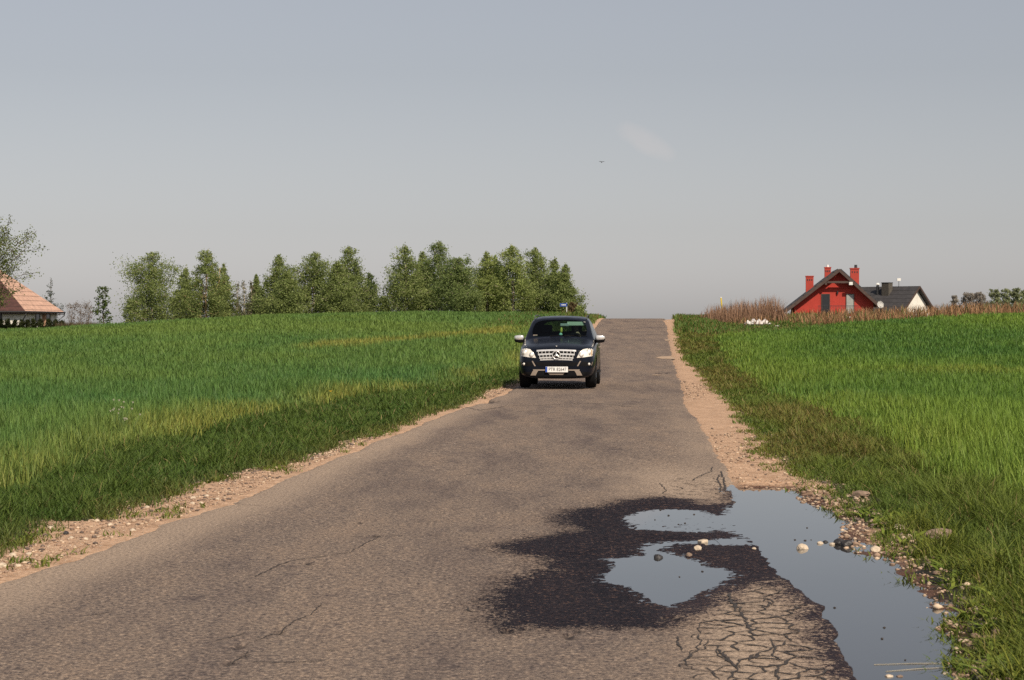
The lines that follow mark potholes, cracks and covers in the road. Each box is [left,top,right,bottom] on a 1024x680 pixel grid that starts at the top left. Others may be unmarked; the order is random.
crack [256,535,406,576]
pothole [589,546,744,608]
crack [215,603,326,663]
crack [660,467,731,498]
crack [676,586,828,680]
